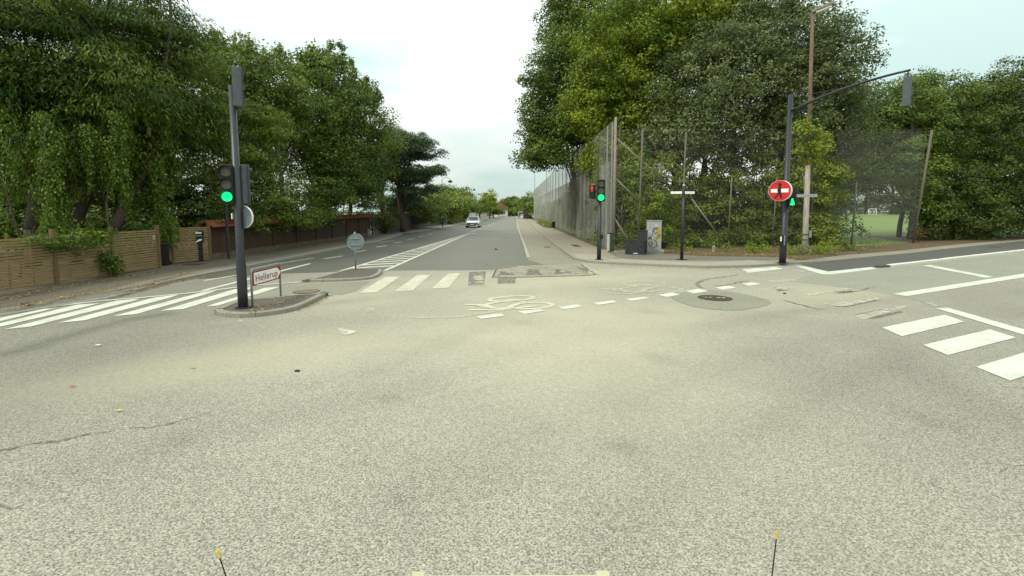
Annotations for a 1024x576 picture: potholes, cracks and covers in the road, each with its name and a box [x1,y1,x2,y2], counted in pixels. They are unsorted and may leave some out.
crack [0,412,209,450]
